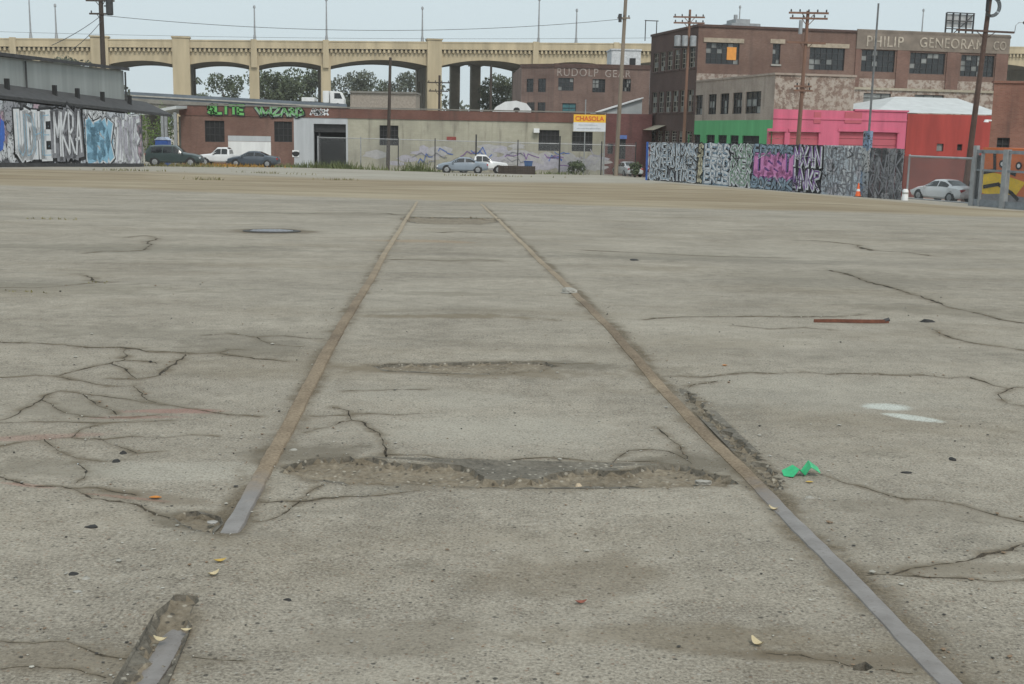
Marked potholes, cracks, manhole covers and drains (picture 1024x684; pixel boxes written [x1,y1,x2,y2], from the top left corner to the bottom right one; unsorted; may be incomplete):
crack [866,544,1024,582]
crack [829,270,1021,323]
crack [686,372,1016,404]
pothole [280,454,738,489]
pothole [173,511,225,534]
pothole [679,388,785,491]
crack [645,314,862,330]
pothole [371,361,556,375]
crack [813,472,1024,522]
crack [0,334,313,535]
crack [258,484,418,522]
